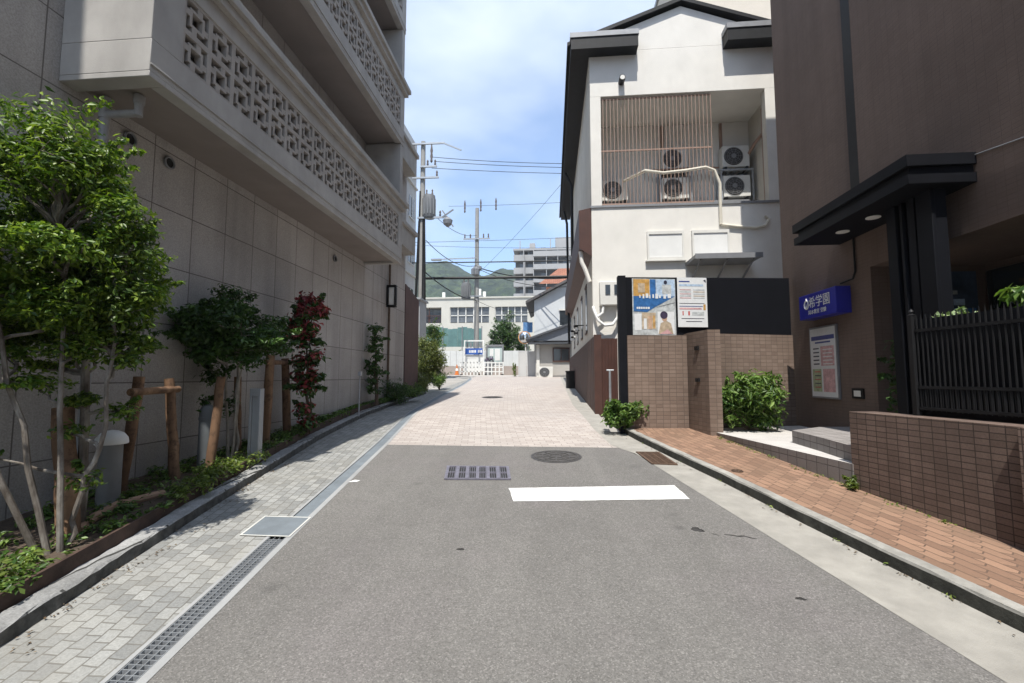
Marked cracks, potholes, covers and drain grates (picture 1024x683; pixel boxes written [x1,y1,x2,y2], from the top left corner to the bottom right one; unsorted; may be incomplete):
manhole cover [240,516,311,537]
manhole cover [531,450,582,463]
drain grate [106,537,286,683]
drain grate [444,465,511,480]
drain grate [636,451,678,465]
